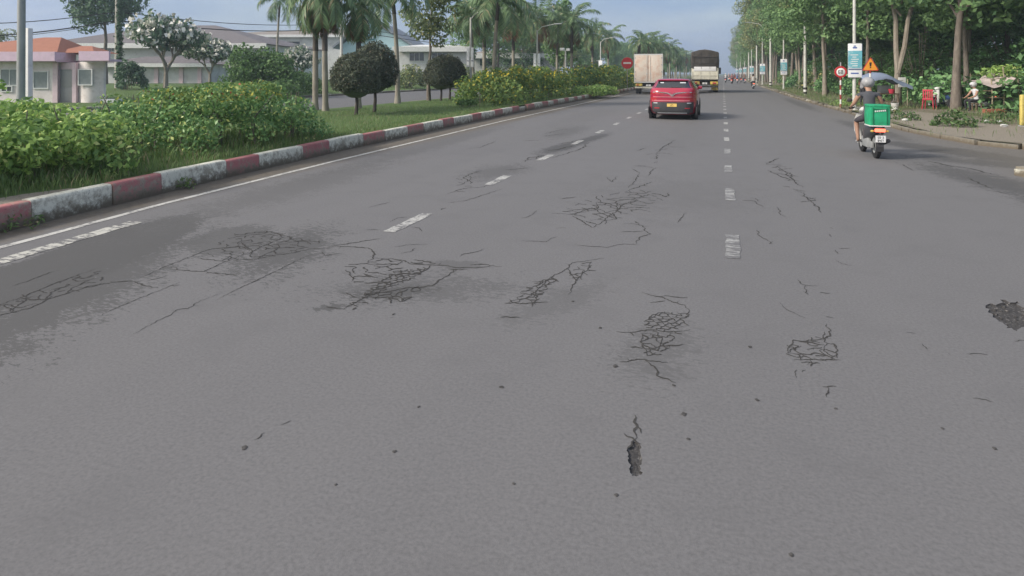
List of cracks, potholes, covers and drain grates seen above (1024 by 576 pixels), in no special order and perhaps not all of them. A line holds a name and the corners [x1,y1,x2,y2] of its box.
crack [784,280,838,378]
crack [0,202,501,334]
crack [745,159,847,265]
crack [504,144,669,318]
crack [620,293,690,382]
pothole [985,299,1024,331]
pothole [627,441,643,476]
